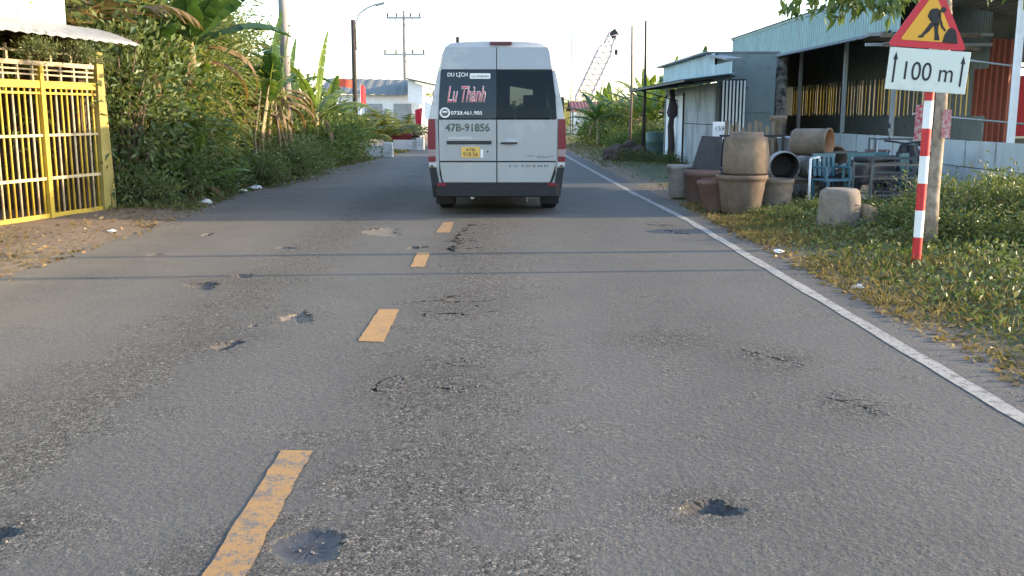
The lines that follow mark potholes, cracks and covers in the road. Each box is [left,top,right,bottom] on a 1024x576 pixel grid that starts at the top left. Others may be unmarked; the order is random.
pothole [276,309,315,324]
crack [413,292,501,319]
crack [445,224,486,252]
crack [823,396,884,415]
pothole [209,339,248,351]
pothole [676,499,750,517]
pothole [264,525,348,566]
crack [370,357,480,411]
pothole [181,281,221,291]
pothole [0,525,29,542]
